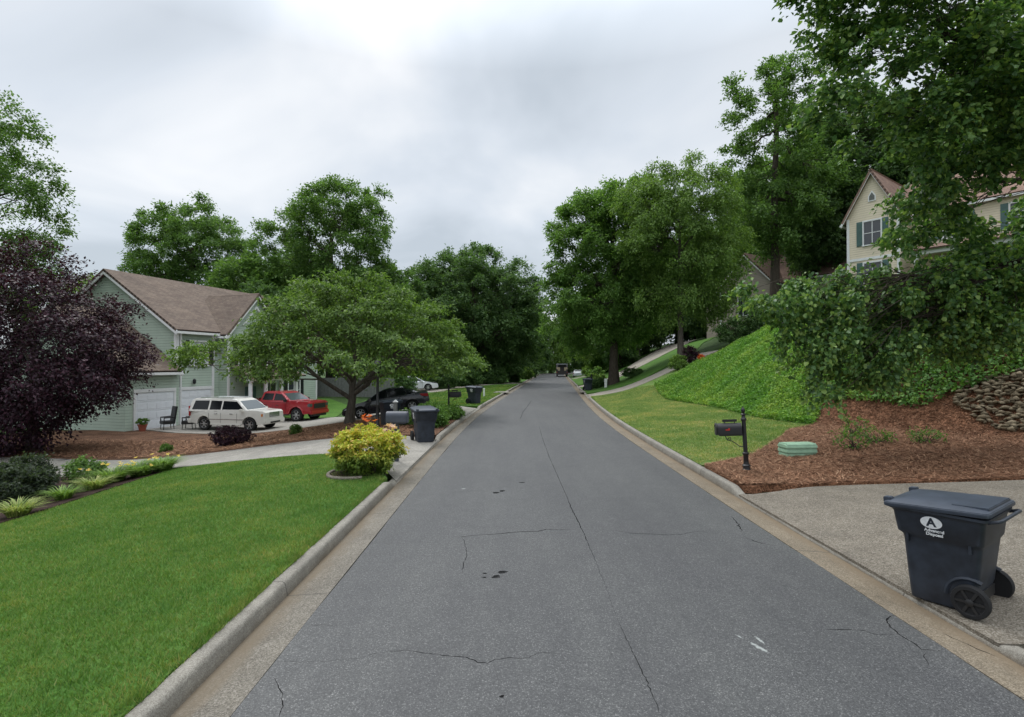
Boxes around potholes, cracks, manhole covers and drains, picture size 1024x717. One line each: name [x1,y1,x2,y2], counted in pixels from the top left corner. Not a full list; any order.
crack [835,616,994,666]
crack [462,529,553,573]
crack [274,650,546,716]
